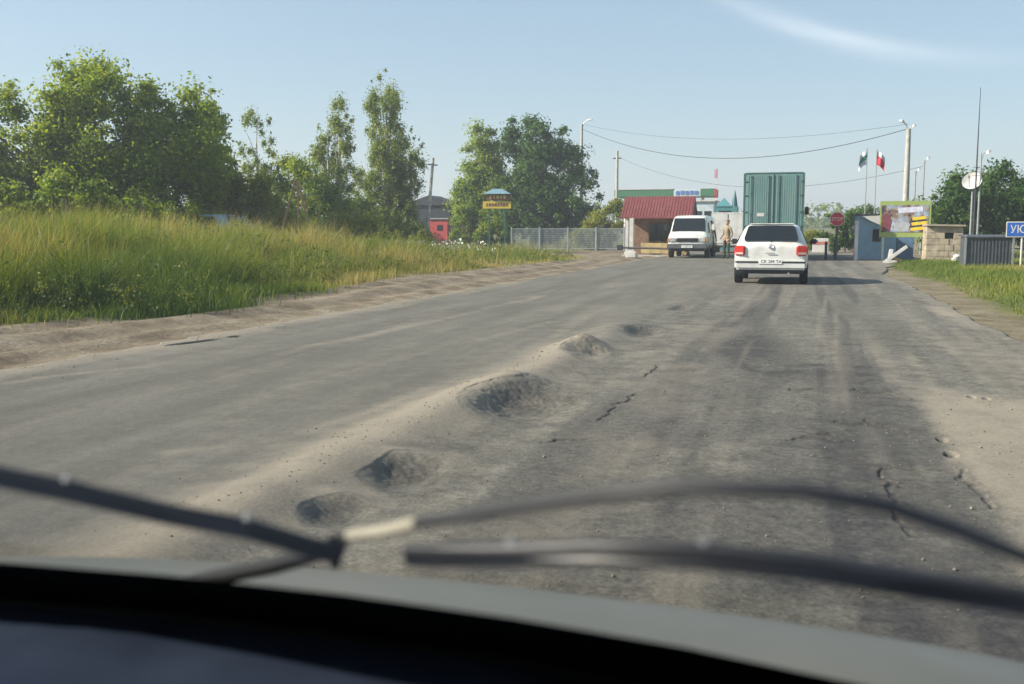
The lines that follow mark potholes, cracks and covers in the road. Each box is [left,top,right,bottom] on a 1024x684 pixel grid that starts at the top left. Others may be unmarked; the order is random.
pothole [612,322,679,341]
crack [770,384,1014,544]
crack [527,362,673,450]
